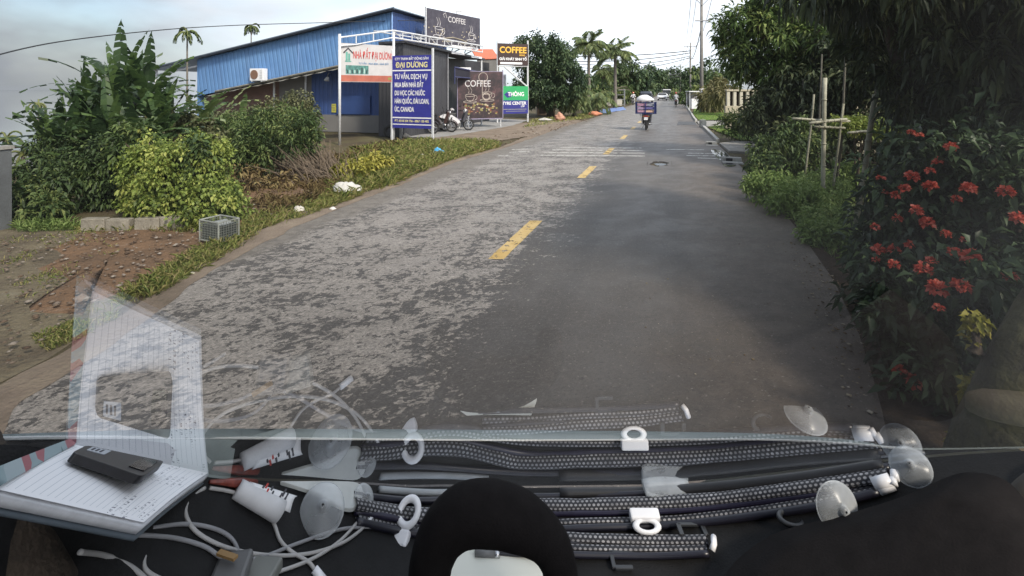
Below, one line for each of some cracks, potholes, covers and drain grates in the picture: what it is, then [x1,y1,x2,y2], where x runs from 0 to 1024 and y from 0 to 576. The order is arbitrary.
drain grate [721,156,745,165]
